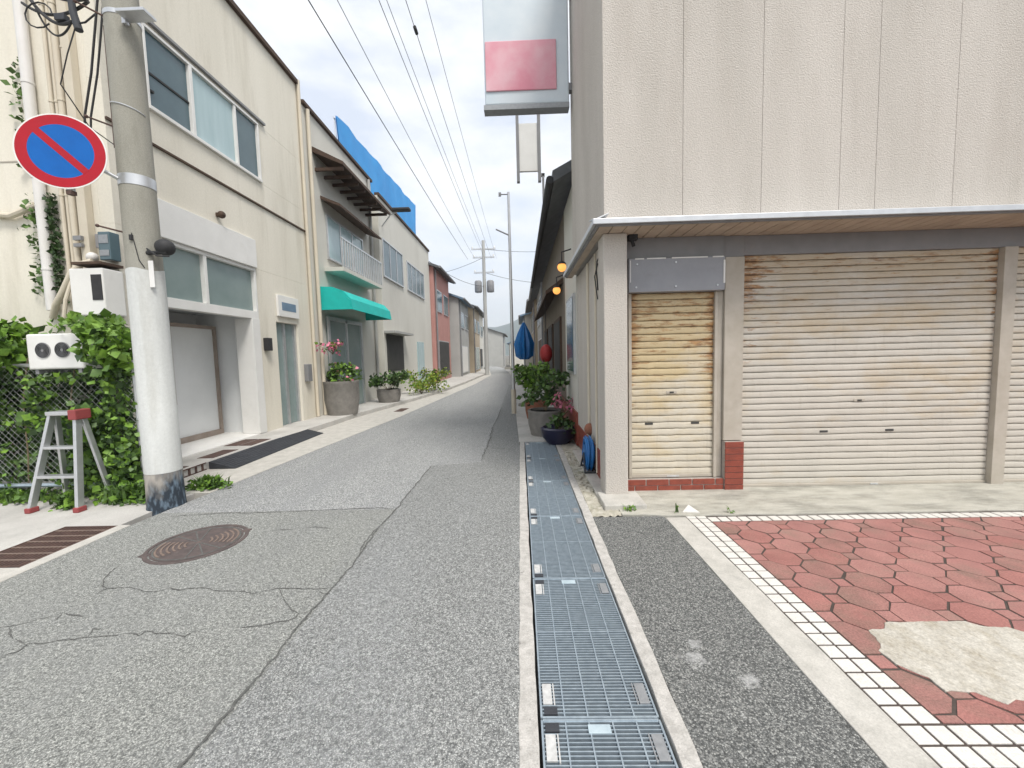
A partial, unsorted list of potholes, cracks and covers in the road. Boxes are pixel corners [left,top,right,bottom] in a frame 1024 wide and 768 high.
drain grate [525,442,560,458]
manhole cover [137,524,252,565]
drain grate [526,458,568,481]
drain grate [527,480,582,516]
drain grate [541,719,679,768]
drain grate [0,526,116,568]
crack [0,466,431,768]
drain grate [529,515,606,579]
drain grate [533,578,659,720]
